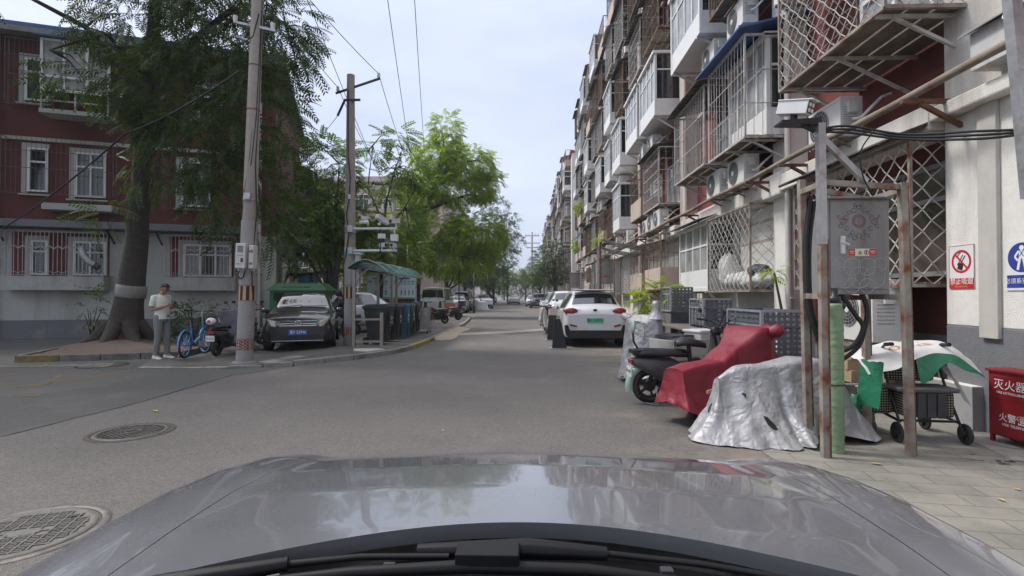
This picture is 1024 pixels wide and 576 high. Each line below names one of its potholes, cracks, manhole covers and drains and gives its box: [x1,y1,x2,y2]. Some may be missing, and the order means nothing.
manhole cover [0,504,112,565]
manhole cover [83,422,177,443]
